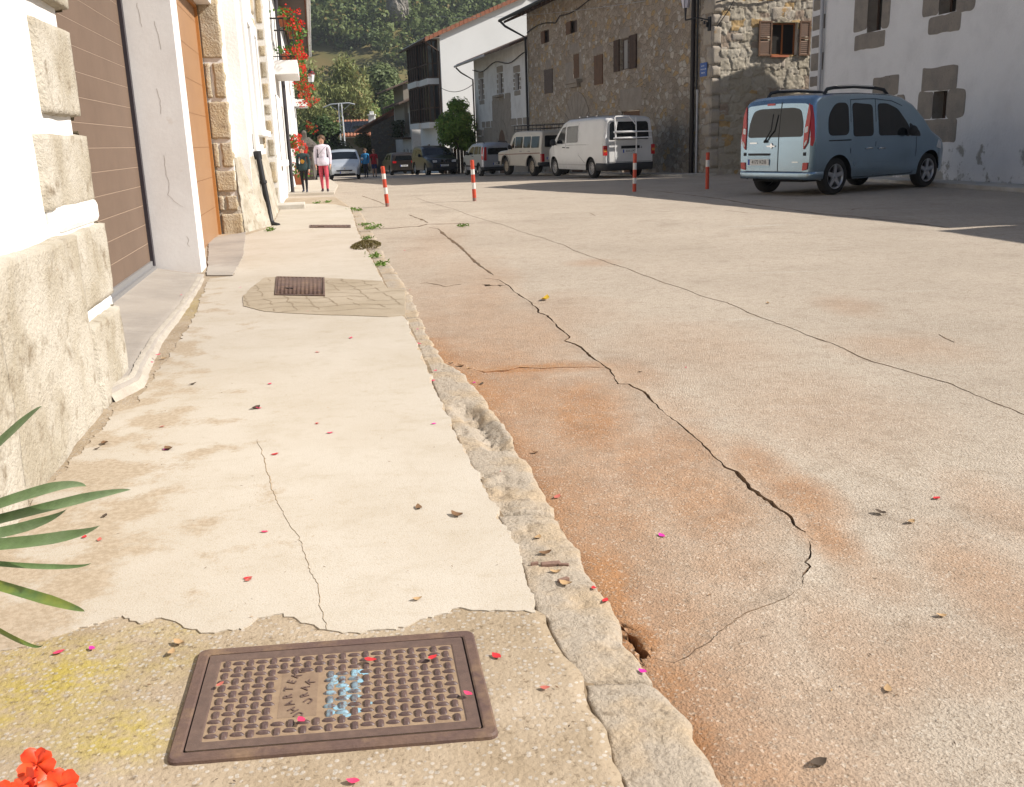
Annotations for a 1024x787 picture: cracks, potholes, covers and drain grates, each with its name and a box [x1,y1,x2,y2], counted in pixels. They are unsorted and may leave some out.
crack [257,442,327,629]
crack [363,196,825,672]
manhole cover [168,631,498,766]
pothole [619,622,654,667]
manhole cover [275,276,325,296]
